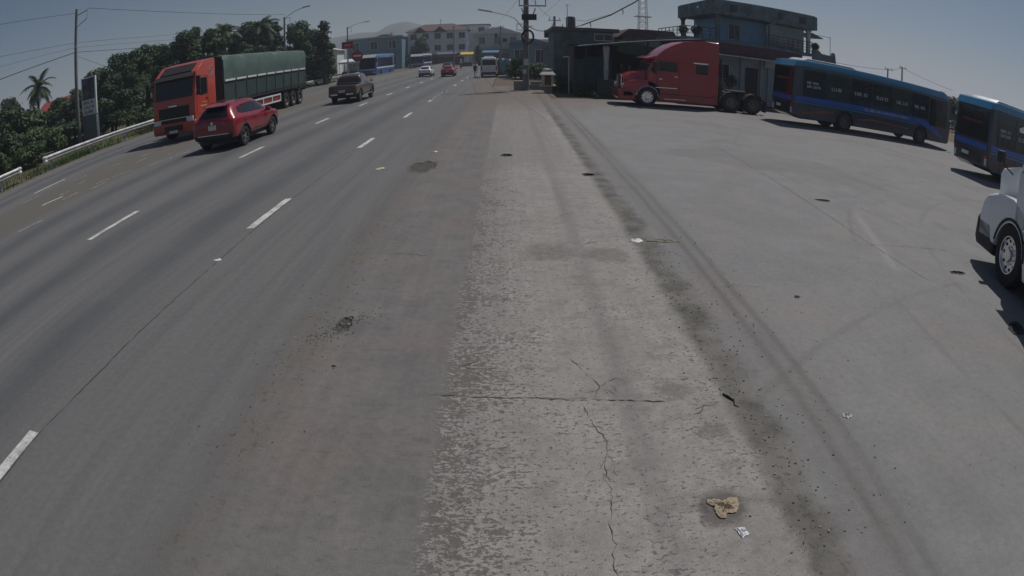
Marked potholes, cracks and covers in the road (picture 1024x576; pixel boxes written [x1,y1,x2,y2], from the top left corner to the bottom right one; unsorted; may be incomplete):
crack [436,358,667,576]
pothole [333,316,355,334]
pothole [406,160,439,173]
